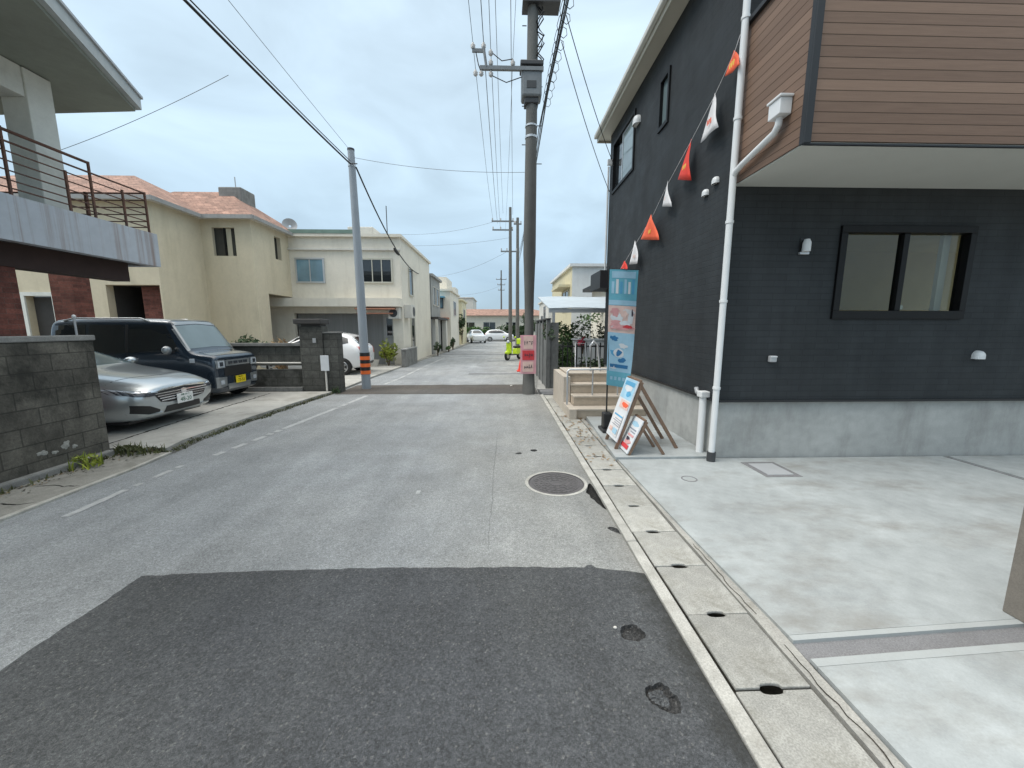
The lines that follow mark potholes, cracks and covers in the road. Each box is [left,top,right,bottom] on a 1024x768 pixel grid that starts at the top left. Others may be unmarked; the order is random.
manhole cover [525,471,588,497]
pothole [620,624,646,641]
pothole [586,483,606,509]
pothole [645,682,682,714]
